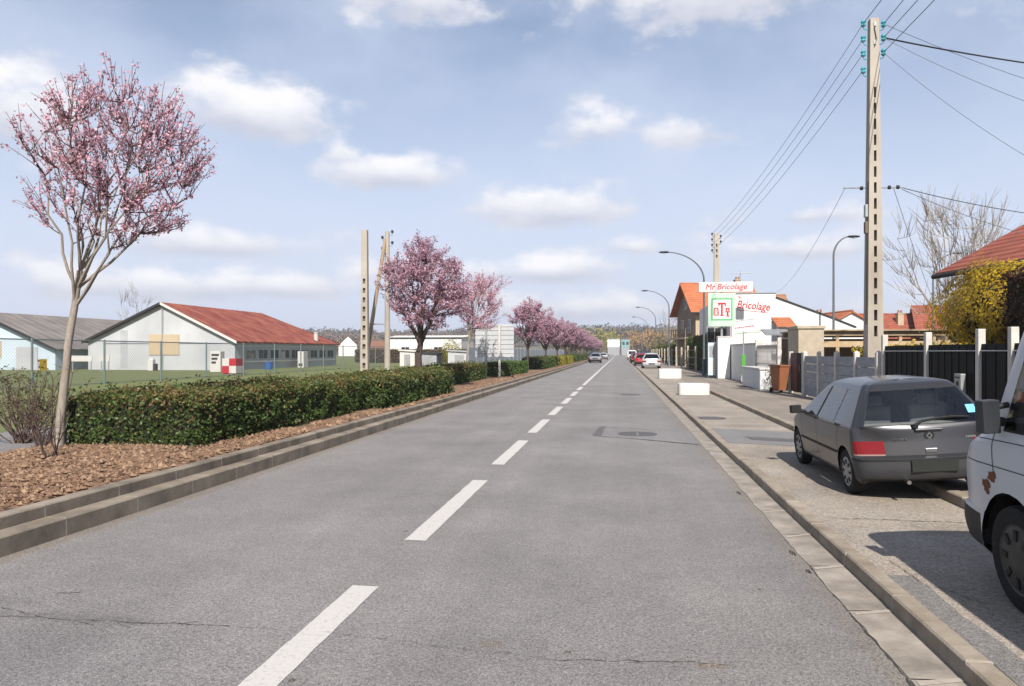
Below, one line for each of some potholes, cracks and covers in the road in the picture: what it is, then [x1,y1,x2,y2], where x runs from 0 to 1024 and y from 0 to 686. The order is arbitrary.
crack [0,607,723,665]
